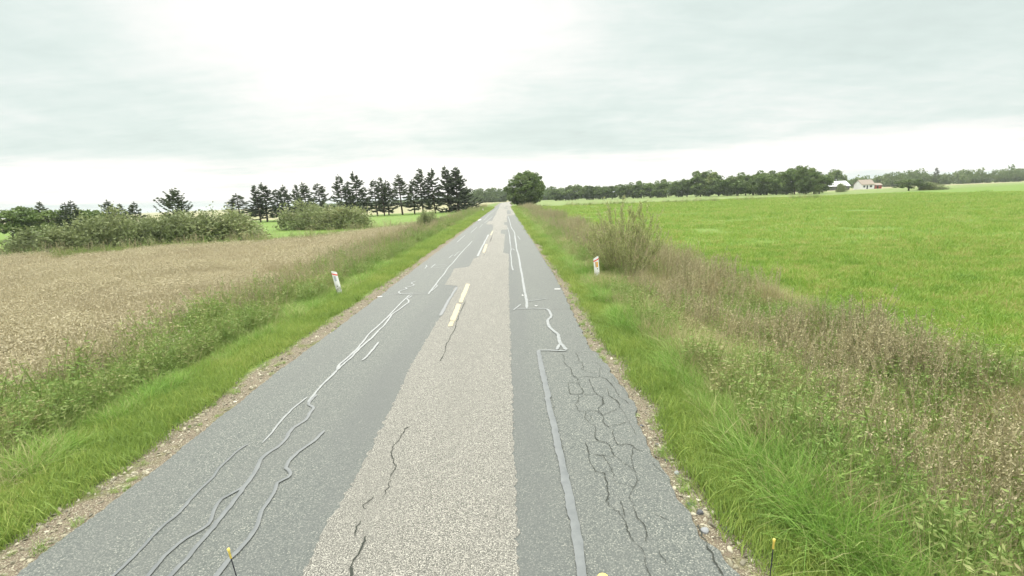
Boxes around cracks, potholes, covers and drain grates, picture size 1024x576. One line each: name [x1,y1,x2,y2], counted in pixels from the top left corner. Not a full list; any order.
crack [562,351,667,574]
crack [350,426,410,576]
